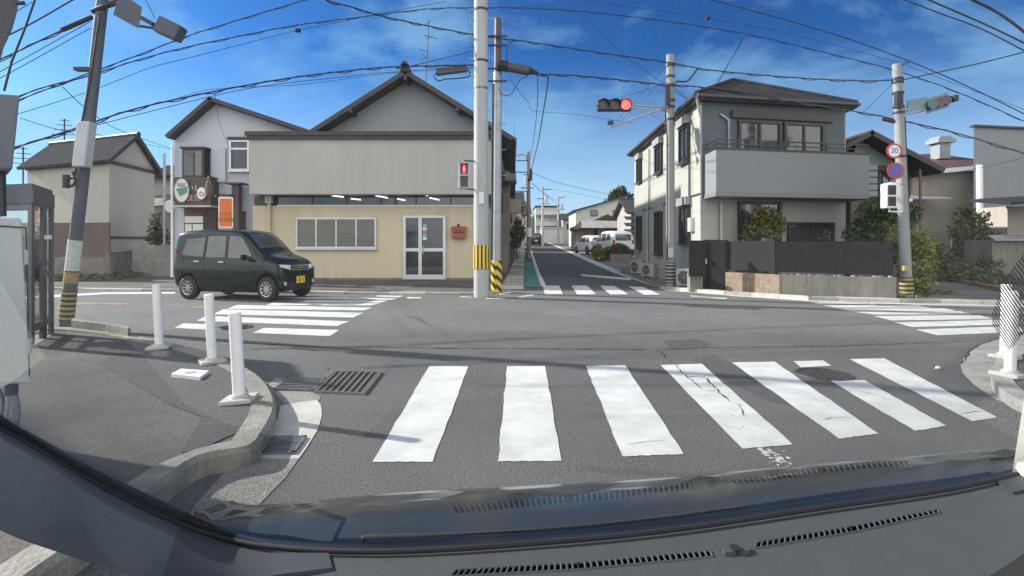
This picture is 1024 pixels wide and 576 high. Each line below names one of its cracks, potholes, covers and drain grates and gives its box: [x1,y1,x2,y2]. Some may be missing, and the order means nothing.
manhole cover [794,367,854,381]
drain grate [262,435,307,455]
crack [657,349,761,428]
drain grate [312,371,382,395]
